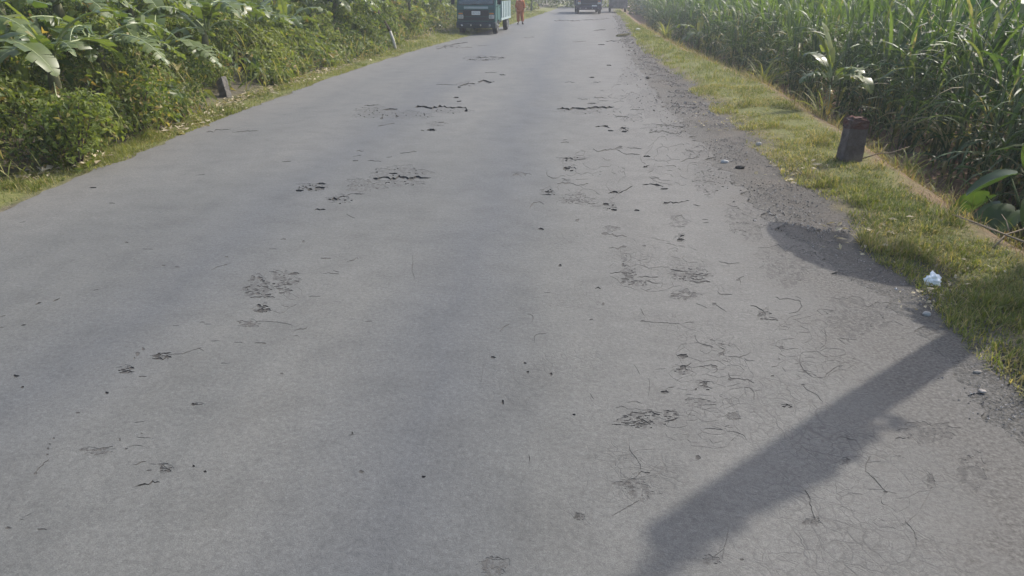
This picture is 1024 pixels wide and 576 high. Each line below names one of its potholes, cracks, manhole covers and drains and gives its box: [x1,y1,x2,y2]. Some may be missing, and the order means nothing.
pothole [612,408,679,429]
crack [702,527,744,565]
crack [802,490,823,527]
pothole [296,183,329,192]
pothole [150,352,172,360]
crack [835,421,987,557]
crack [612,447,668,515]
